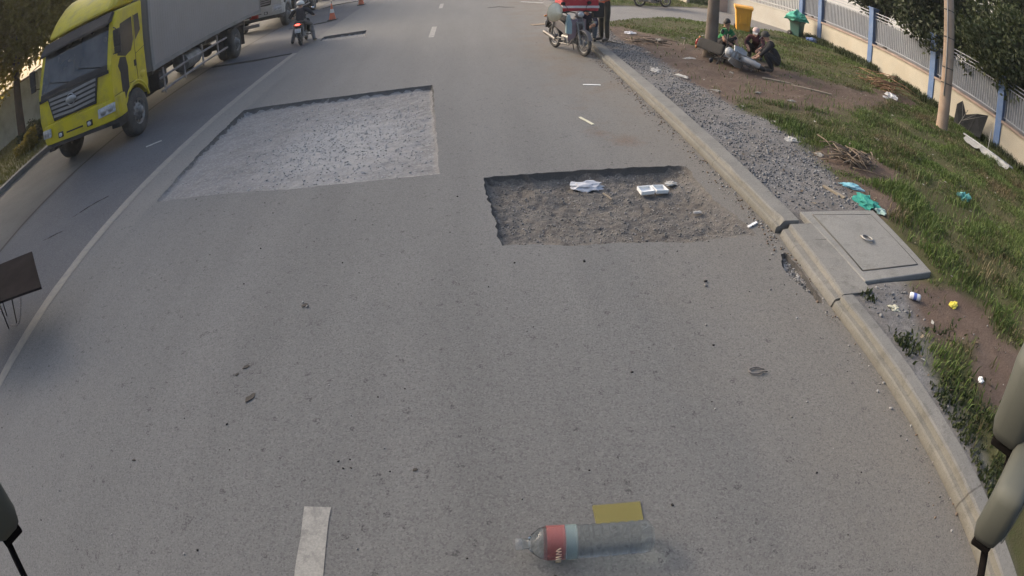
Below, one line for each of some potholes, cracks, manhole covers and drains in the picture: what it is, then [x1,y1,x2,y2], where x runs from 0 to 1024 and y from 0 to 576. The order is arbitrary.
pothole [484,165,757,246]
crack [43,196,108,241]
manhole cover [800,210,931,285]
